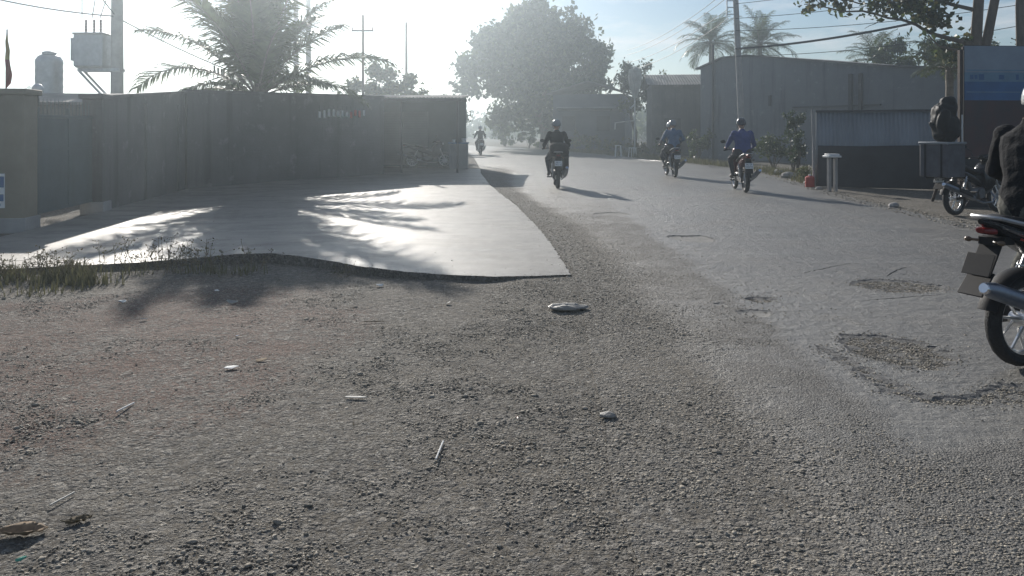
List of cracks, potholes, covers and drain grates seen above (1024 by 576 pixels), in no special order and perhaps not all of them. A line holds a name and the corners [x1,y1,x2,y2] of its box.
pothole [850,279,949,293]
pothole [837,334,958,371]
pothole [735,309,773,317]
pothole [816,345,1024,407]
